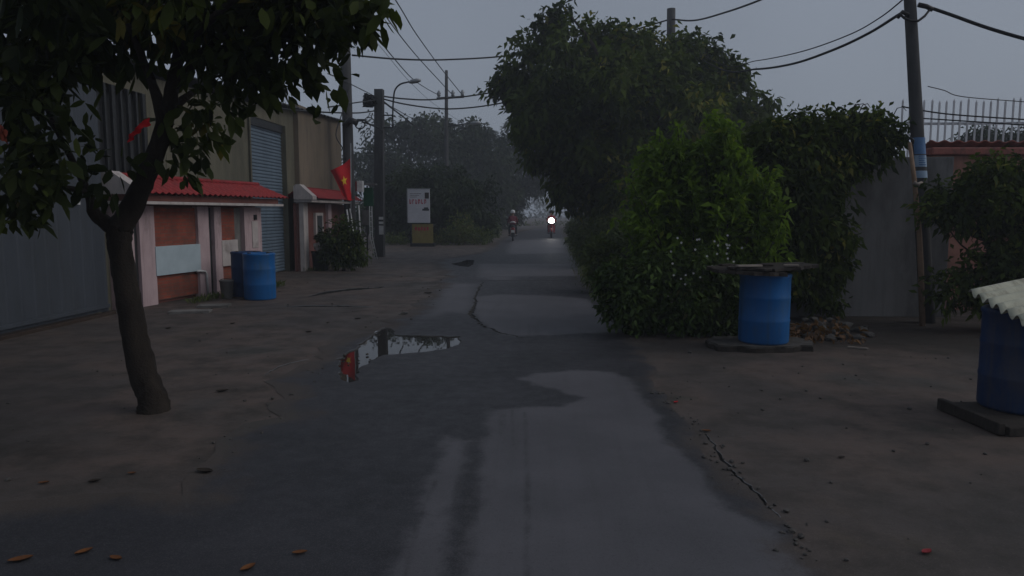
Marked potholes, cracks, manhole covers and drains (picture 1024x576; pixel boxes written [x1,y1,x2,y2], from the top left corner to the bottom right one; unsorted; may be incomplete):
crack [468,280,548,338]
pothole [337,327,461,383]
crack [287,286,385,307]
crack [704,431,781,518]
